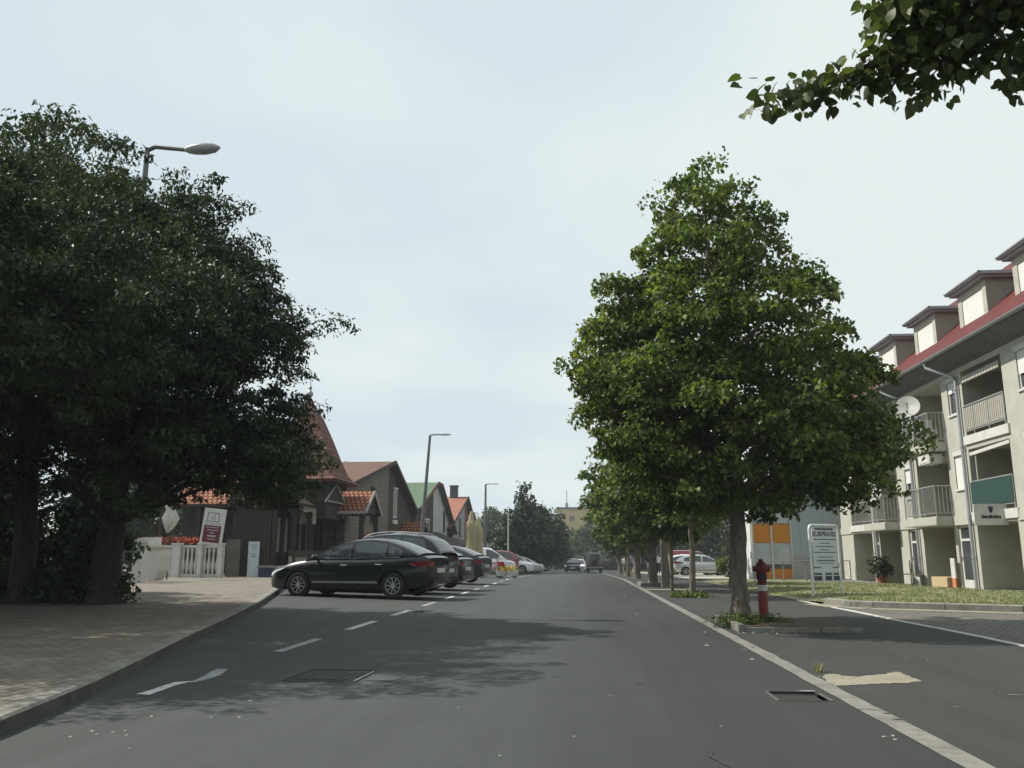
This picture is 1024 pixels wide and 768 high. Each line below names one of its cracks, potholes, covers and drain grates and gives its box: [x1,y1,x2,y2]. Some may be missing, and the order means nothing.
drain grate [764,691,834,702]
